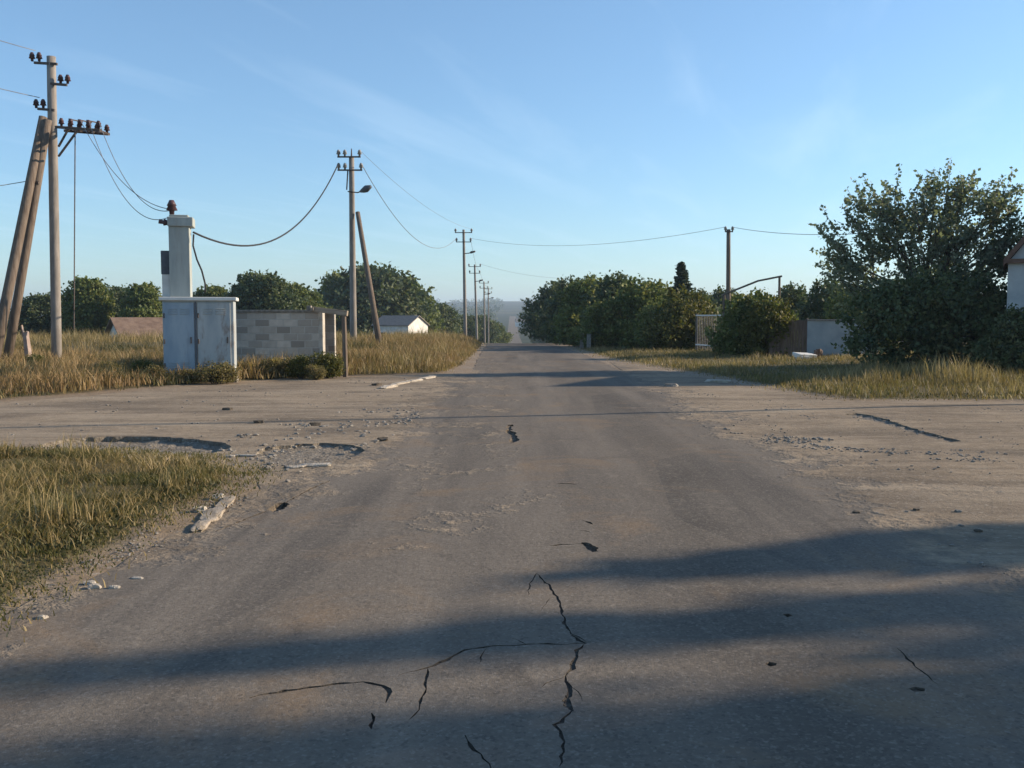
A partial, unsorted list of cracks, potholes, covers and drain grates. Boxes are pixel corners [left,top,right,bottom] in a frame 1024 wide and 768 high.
pothole [267,502,290,512]
crack [897,648,937,684]
crack [250,573,587,768]
pothole [256,443,365,465]
pothole [41,436,231,458]
